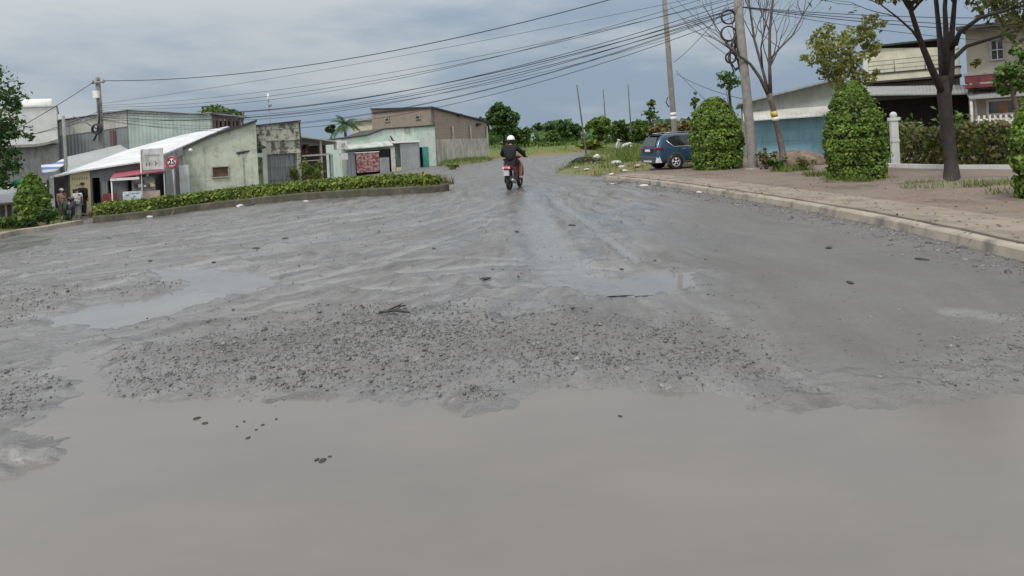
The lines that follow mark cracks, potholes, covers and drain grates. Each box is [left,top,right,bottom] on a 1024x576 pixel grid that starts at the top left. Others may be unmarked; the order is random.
pothole [538,267,702,298]
pothole [0,338,1024,576]
pothole [31,264,287,333]
